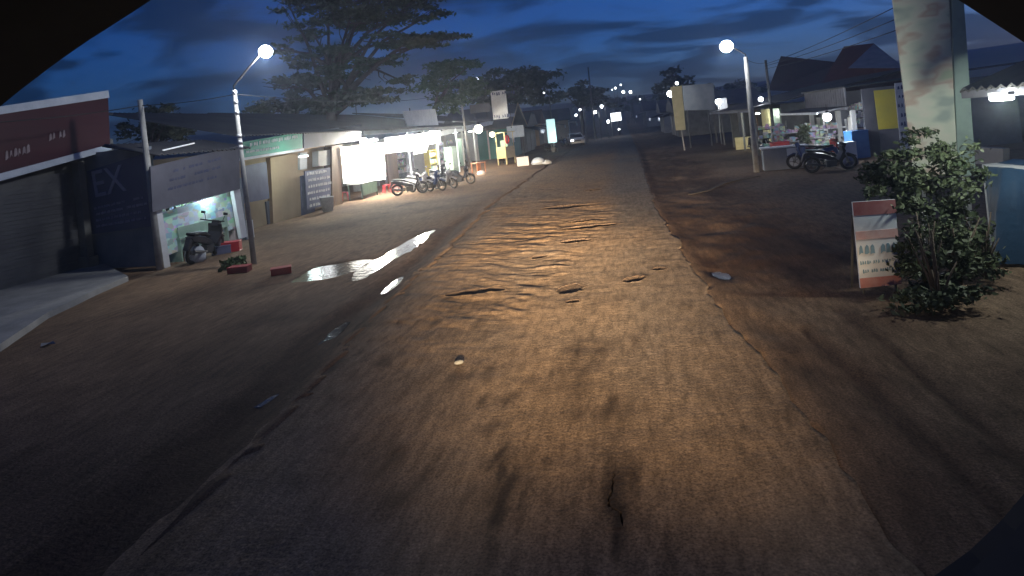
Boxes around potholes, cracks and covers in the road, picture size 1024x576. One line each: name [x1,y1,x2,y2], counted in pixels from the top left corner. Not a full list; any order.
pothole [556,297,590,306]
pothole [438,285,513,299]
crack [591,466,642,532]
pothole [548,281,593,297]
pothole [614,274,653,285]
